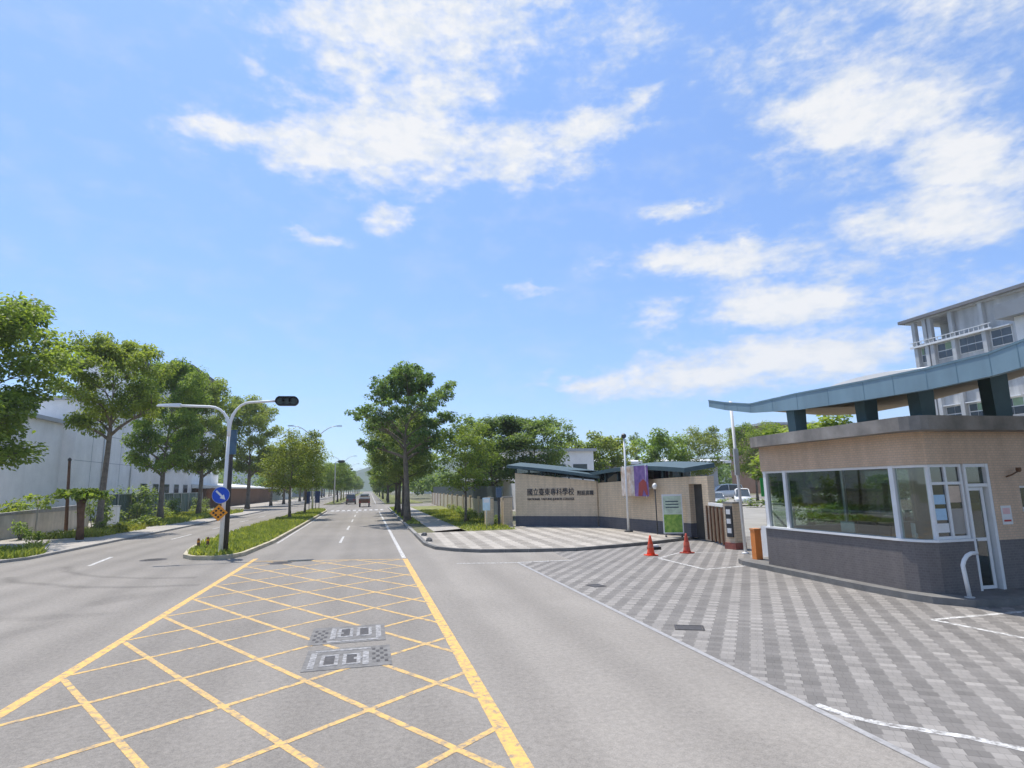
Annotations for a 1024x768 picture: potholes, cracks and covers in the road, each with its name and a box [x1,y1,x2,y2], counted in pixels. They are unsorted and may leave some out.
manhole cover [300,644,392,673]
manhole cover [307,624,386,646]
